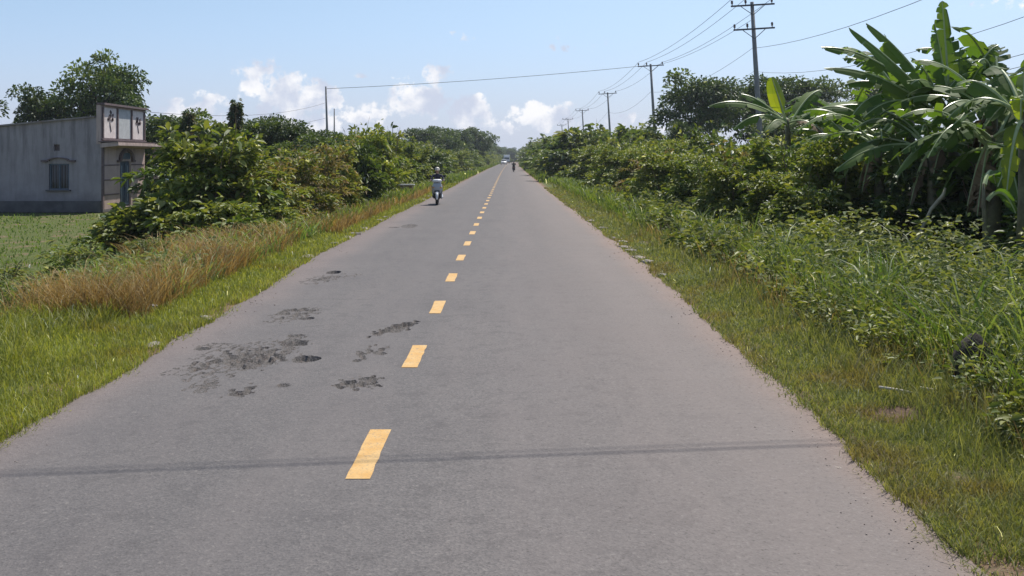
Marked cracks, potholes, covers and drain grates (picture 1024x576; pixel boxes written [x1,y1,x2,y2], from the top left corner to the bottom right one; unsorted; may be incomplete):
pothole [292,355,322,363]
pothole [367,320,421,338]
pothole [331,375,385,391]
pothole [284,334,309,347]
